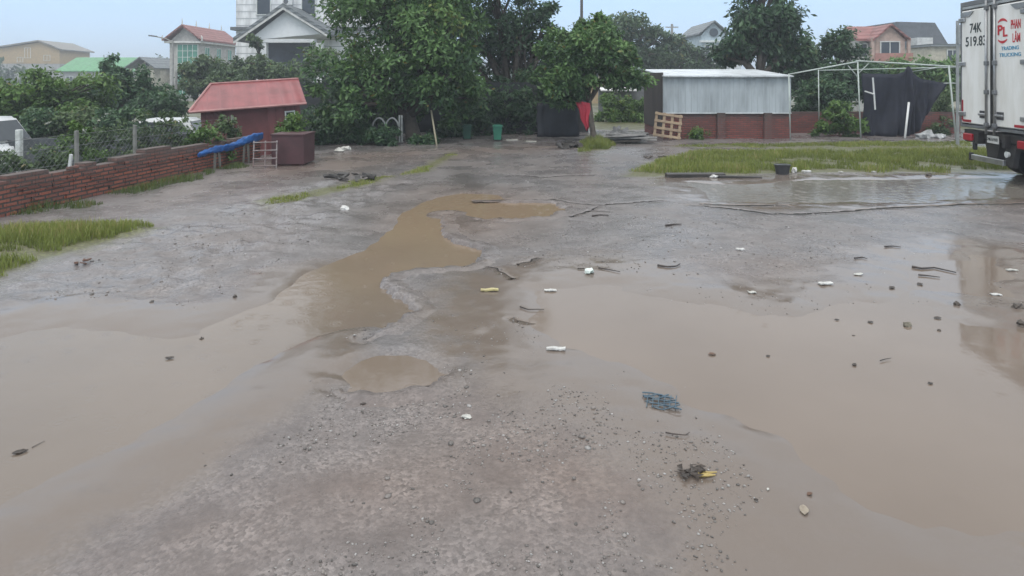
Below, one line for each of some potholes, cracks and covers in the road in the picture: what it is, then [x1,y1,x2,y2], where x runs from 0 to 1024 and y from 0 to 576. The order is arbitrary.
pothole [332,355,466,409]
pothole [460,199,570,222]
